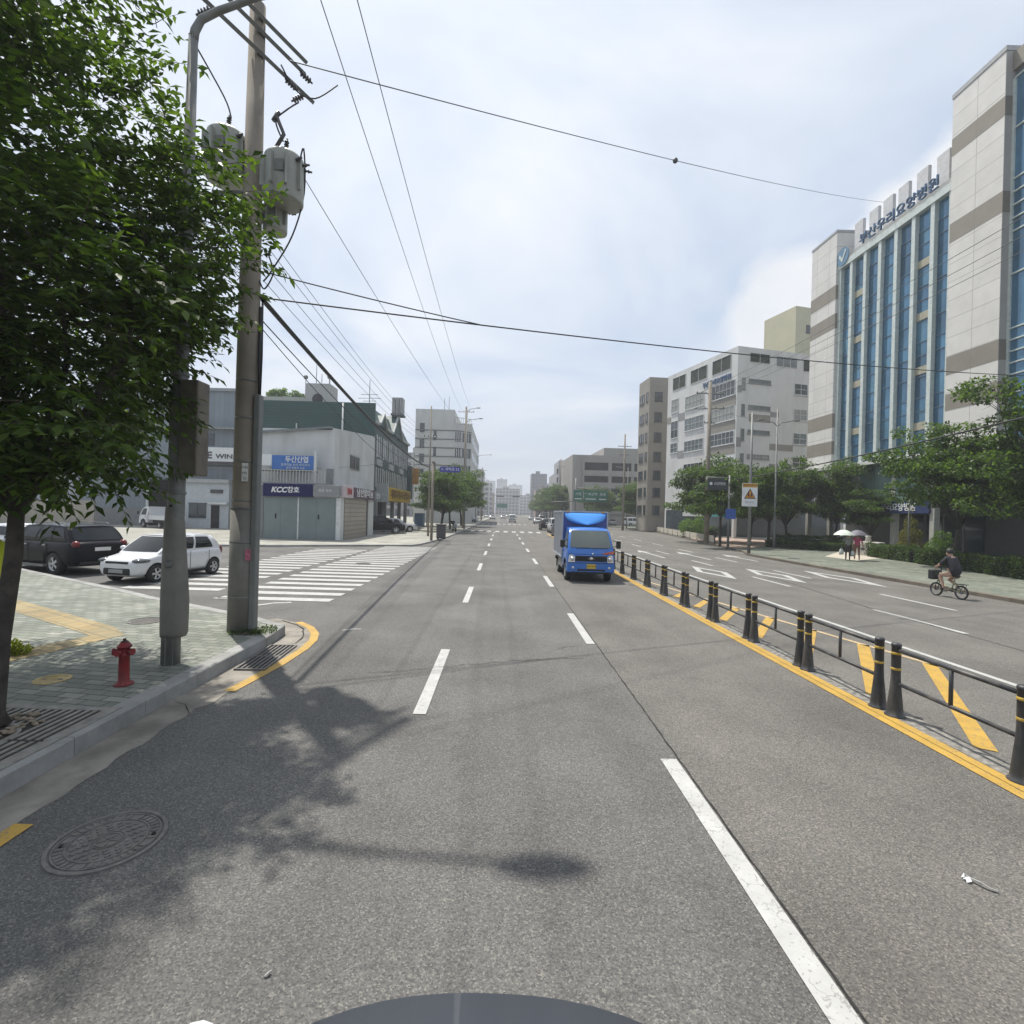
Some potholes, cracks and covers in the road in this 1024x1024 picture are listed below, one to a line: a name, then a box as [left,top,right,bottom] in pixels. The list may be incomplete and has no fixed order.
manhole cover [126,617,160,625]
manhole cover [41,810,168,877]
drain grate [233,644,297,671]
